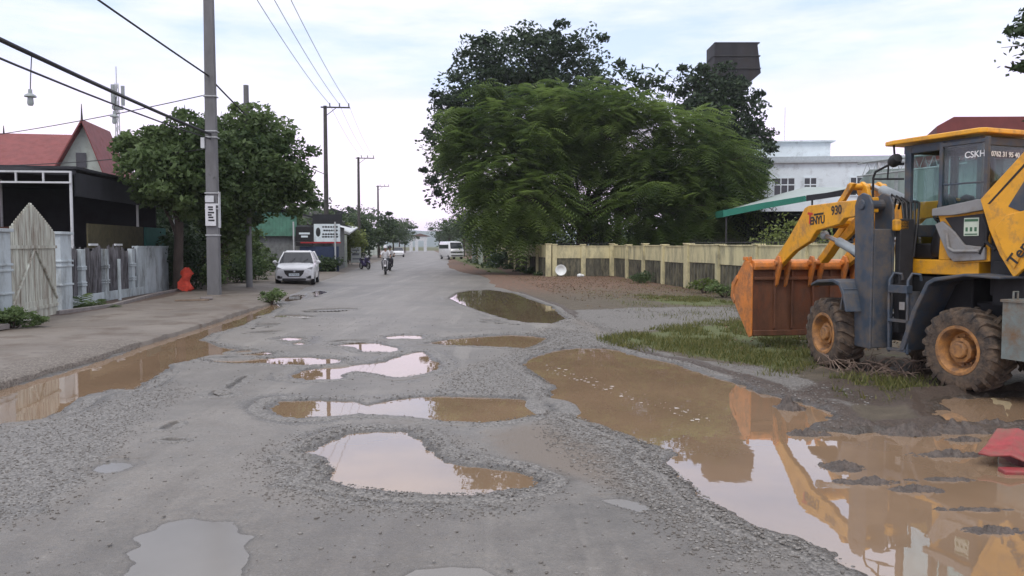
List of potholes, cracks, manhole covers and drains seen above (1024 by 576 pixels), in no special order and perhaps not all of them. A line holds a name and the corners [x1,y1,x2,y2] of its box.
pothole [412,333,559,350]
pothole [75,505,299,576]
pothole [320,340,416,354]
pothole [280,423,568,503]
pothole [443,289,576,325]
pothole [0,302,291,435]
pothole [78,458,147,475]
pothole [505,345,1024,576]
pothole [248,390,581,427]
pothole [272,349,457,383]
